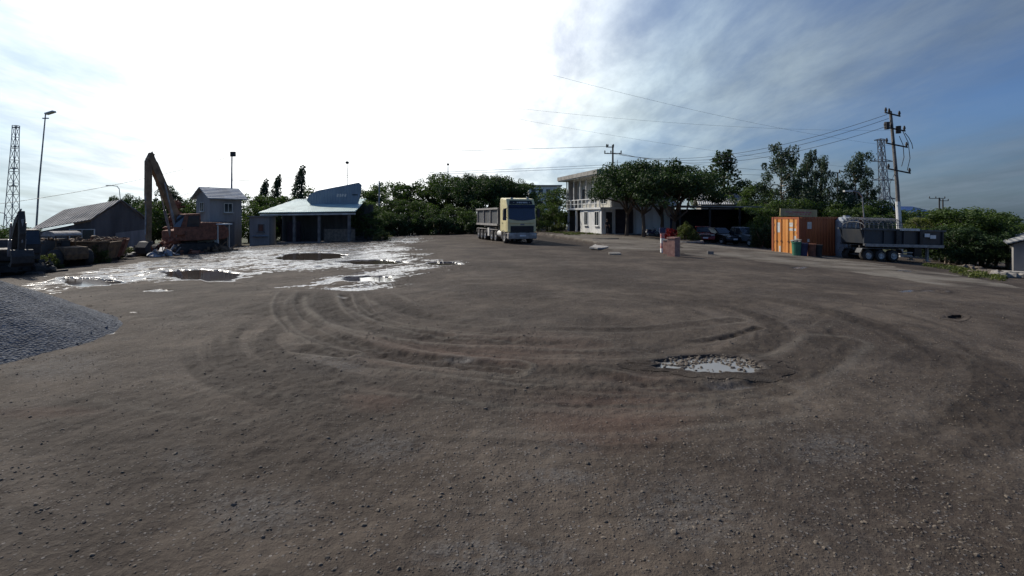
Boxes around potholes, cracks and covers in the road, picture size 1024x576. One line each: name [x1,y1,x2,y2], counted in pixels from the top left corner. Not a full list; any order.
pothole [322,274,411,285]
pothole [622,351,795,382]
pothole [43,277,146,288]
pothole [143,267,260,283]
pothole [939,312,970,322]
pothole [259,251,362,263]
pothole [317,258,428,266]
